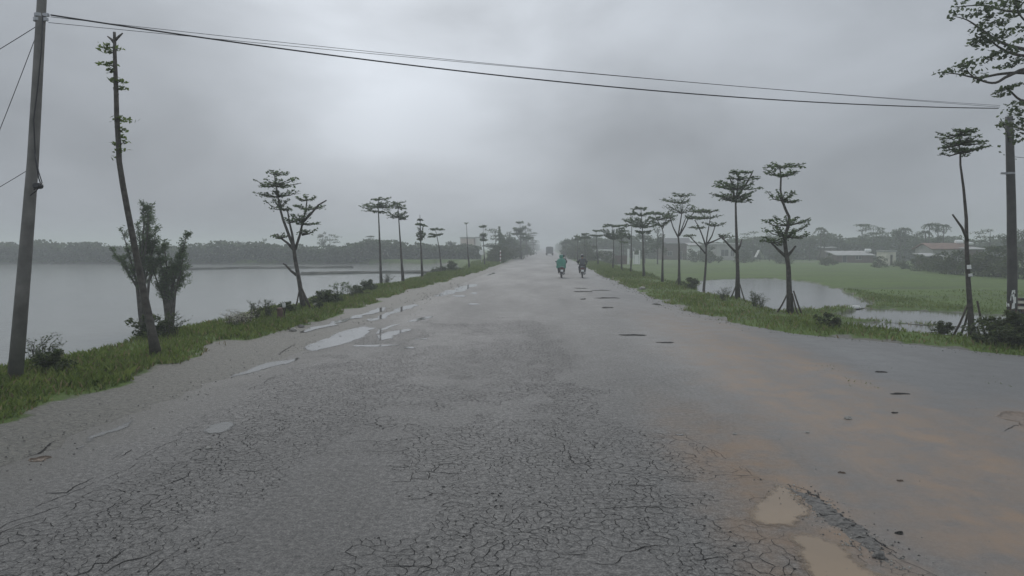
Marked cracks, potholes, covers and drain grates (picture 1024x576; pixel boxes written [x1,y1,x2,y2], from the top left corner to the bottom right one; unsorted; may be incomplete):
crack [0,374,805,576]
crack [791,485,937,576]
